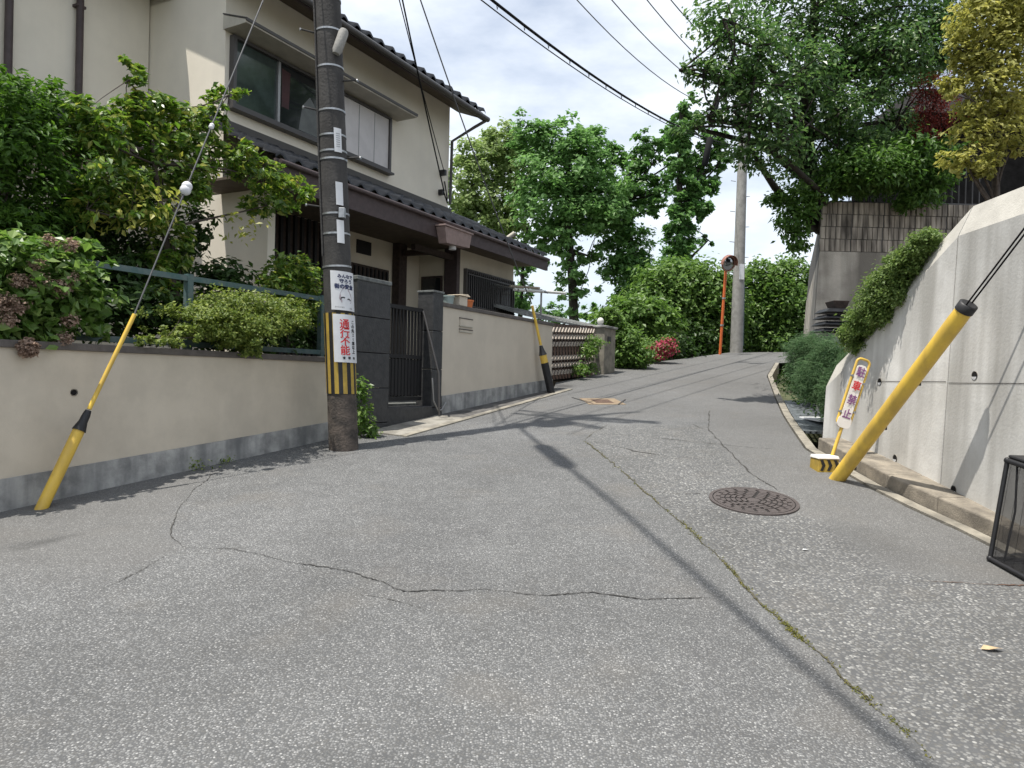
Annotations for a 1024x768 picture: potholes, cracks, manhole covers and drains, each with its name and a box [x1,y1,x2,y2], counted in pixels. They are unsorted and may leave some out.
utility cover [571,397,626,405]
manhole cover [709,487,800,516]
crack [218,548,706,609]
crack [102,471,220,589]
